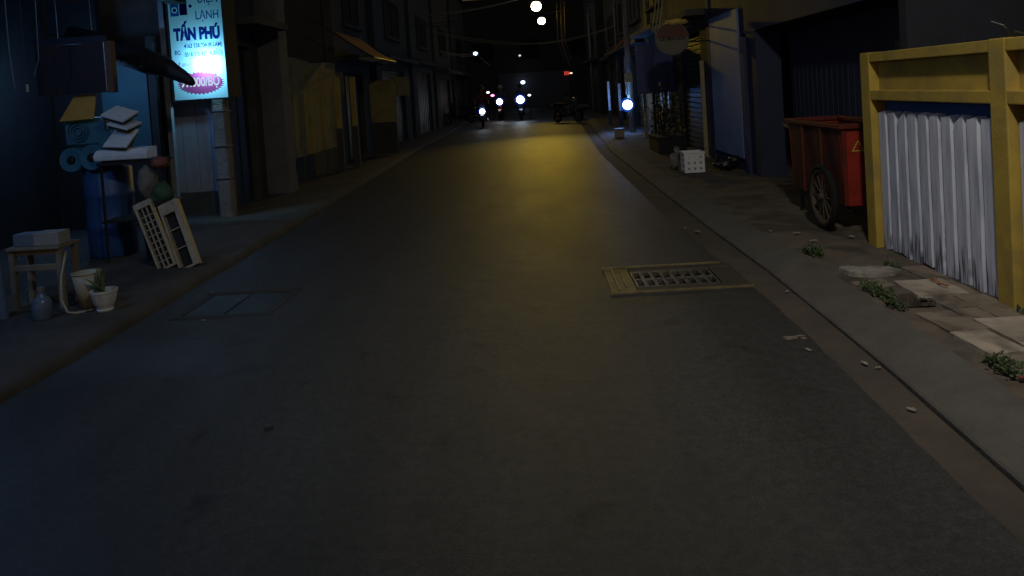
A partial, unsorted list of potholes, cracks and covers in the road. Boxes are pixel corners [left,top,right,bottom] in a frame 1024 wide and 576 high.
manhole cover [169,287,301,321]
